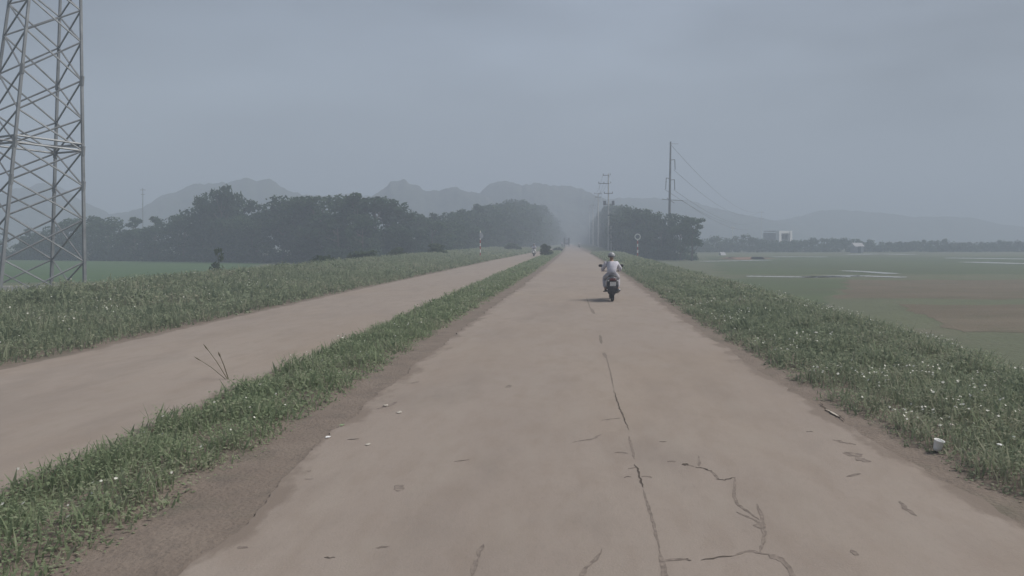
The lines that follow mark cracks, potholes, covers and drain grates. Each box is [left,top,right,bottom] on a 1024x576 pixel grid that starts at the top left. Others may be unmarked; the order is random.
crack [575,358,796,576]
crack [471,544,484,576]
crack [899,501,917,516]
